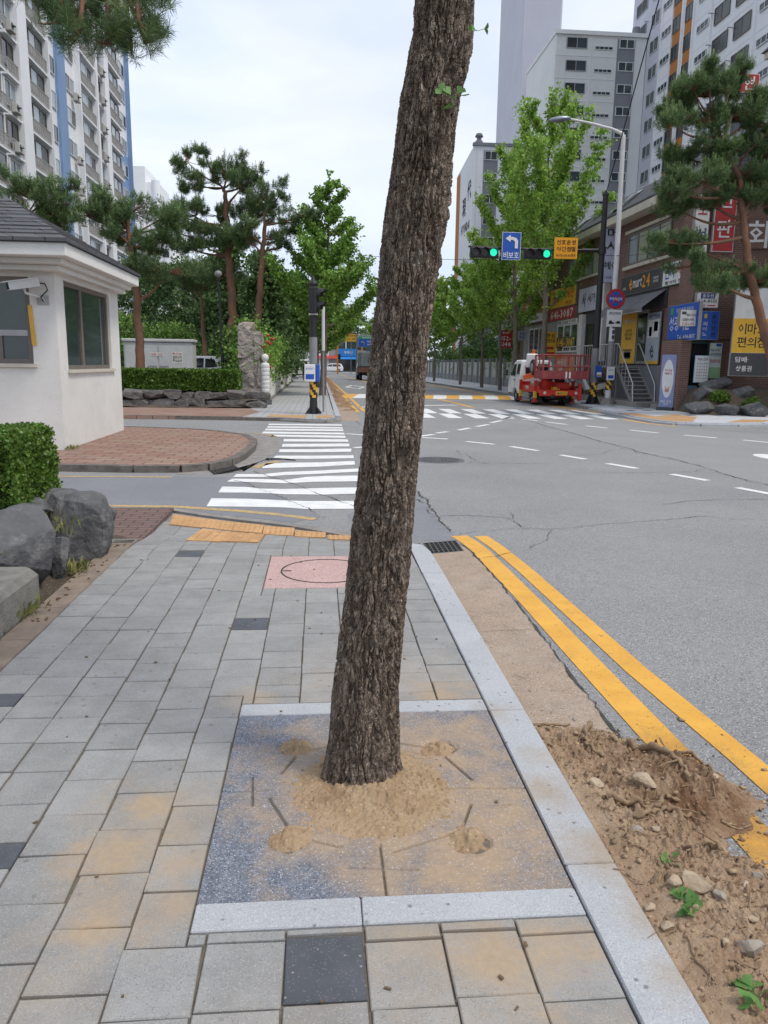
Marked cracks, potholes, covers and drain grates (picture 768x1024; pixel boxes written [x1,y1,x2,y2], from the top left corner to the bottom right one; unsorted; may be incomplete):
drain grate [423,540,464,554]
drain grate [208,465,244,475]
manhole cover [263,556,349,590]
crack [417,491,451,532]
crack [461,499,766,546]
